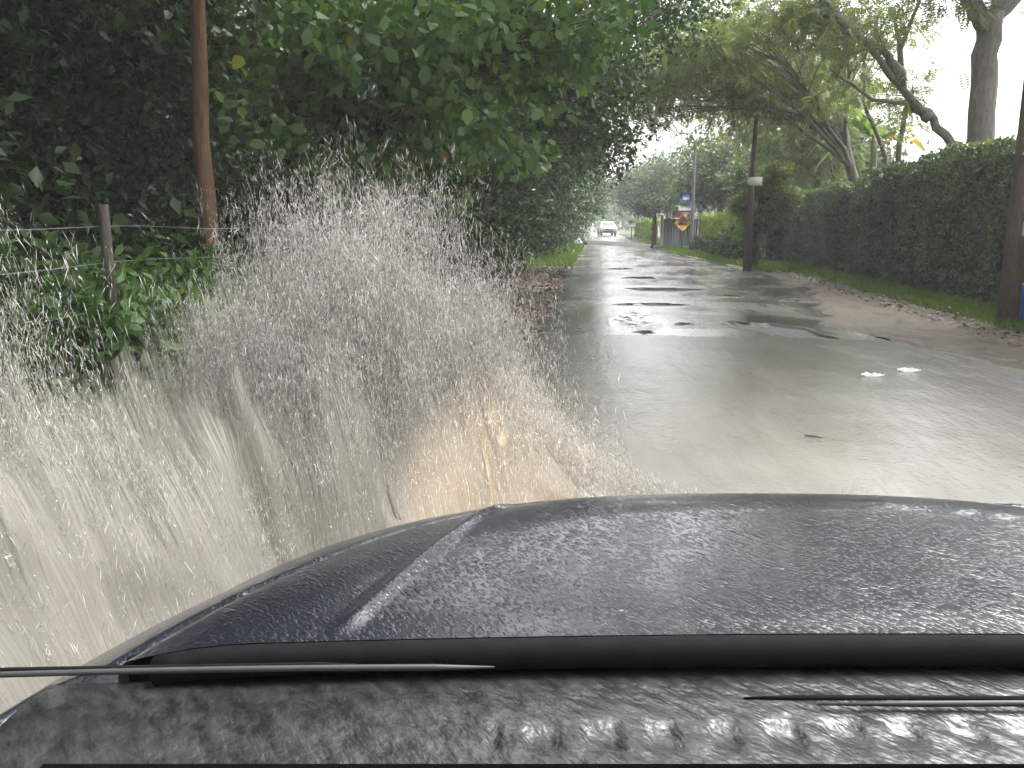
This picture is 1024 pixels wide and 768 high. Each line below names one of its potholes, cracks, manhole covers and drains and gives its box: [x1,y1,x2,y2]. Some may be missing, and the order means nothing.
pothole [721,320,843,339]
pothole [606,303,663,335]
